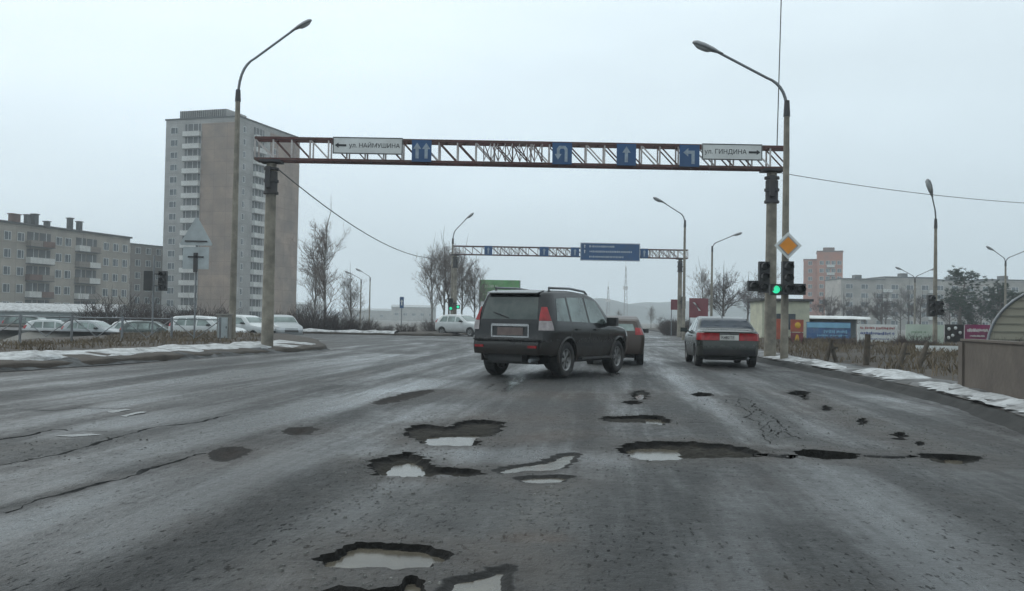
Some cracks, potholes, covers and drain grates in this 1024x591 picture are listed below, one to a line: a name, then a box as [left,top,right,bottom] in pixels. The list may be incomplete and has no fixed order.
pothole [599,415,672,425]
pothole [793,449,860,460]
pothole [917,453,983,464]
pothole [322,575,426,591]
pothole [312,542,455,570]
pothole [402,419,508,446]
pothole [631,390,650,400]
crack [4,453,206,513]
pothole [490,452,583,474]
pothole [615,441,761,461]
pothole [512,474,577,484]
crack [0,413,237,465]
